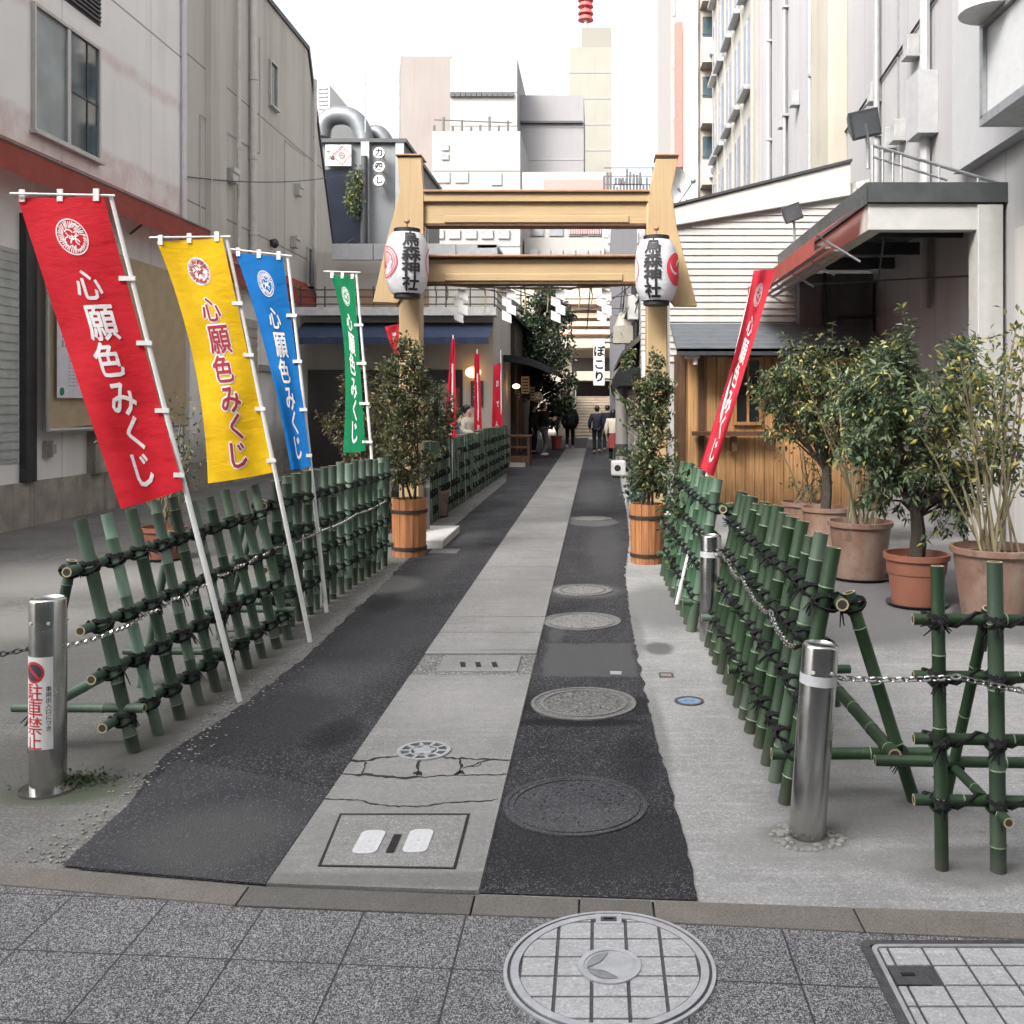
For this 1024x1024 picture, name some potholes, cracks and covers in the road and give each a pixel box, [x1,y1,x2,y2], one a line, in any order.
crack [338,756,509,779]
manhole cover [552,584,613,596]
manhole cover [502,776,647,837]
utility cover [674,696,704,706]
manhole cover [860,940,1024,1024]
crack [324,798,495,807]
manhole cover [503,911,716,1024]
manhole cover [544,612,621,630]
manhole cover [531,687,636,721]
